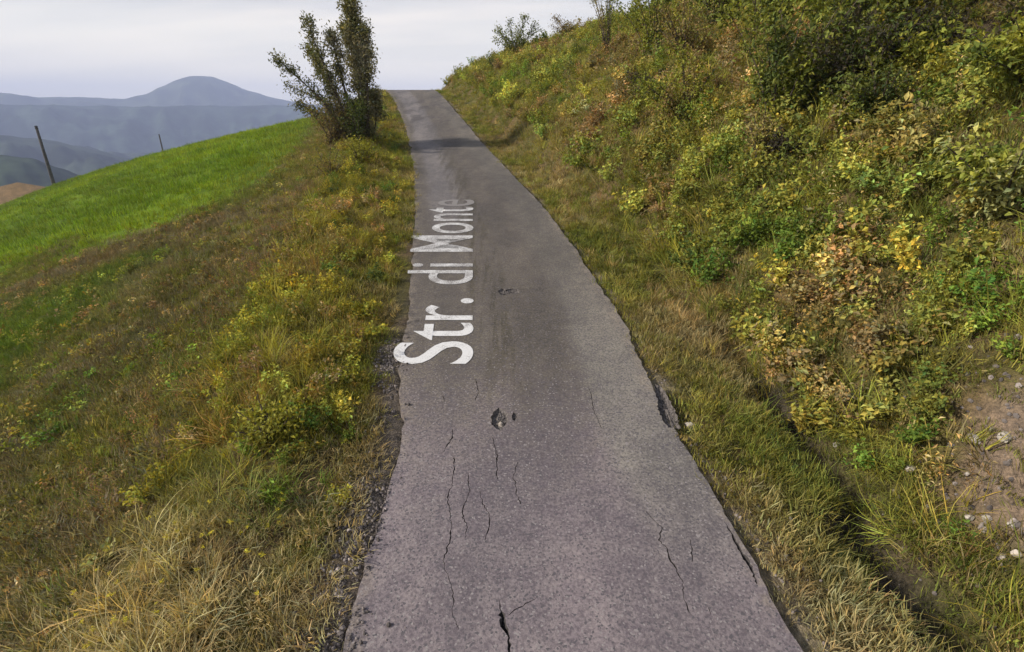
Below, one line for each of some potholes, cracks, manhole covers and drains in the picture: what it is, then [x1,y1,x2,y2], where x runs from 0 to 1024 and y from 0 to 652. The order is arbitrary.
pothole [491,408,509,430]
crack [498,598,536,652]
crack [443,429,521,629]
crack [646,512,693,613]
